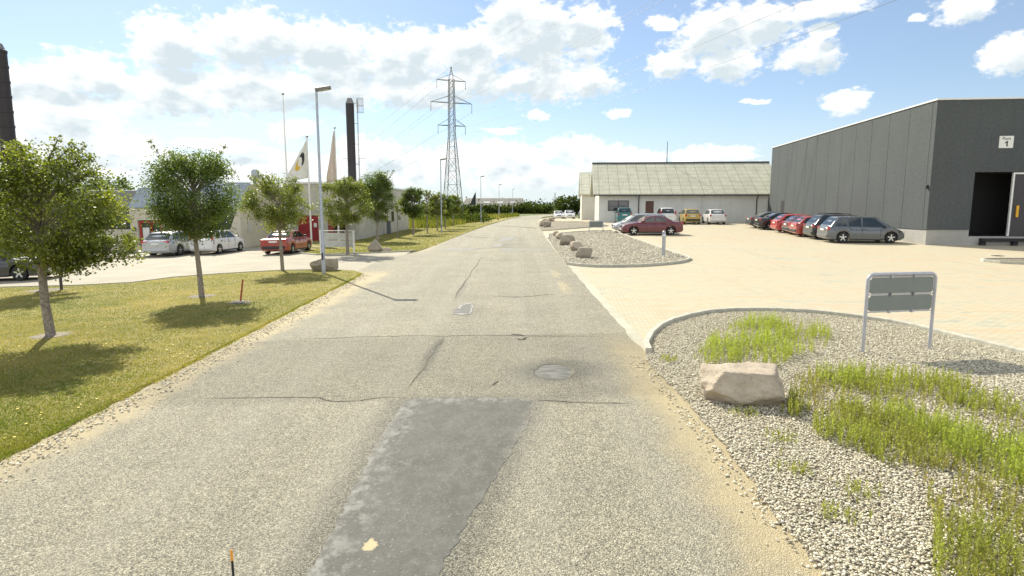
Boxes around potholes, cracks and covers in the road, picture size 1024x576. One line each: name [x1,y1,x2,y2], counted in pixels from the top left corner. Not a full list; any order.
crack [238,340,443,402]
